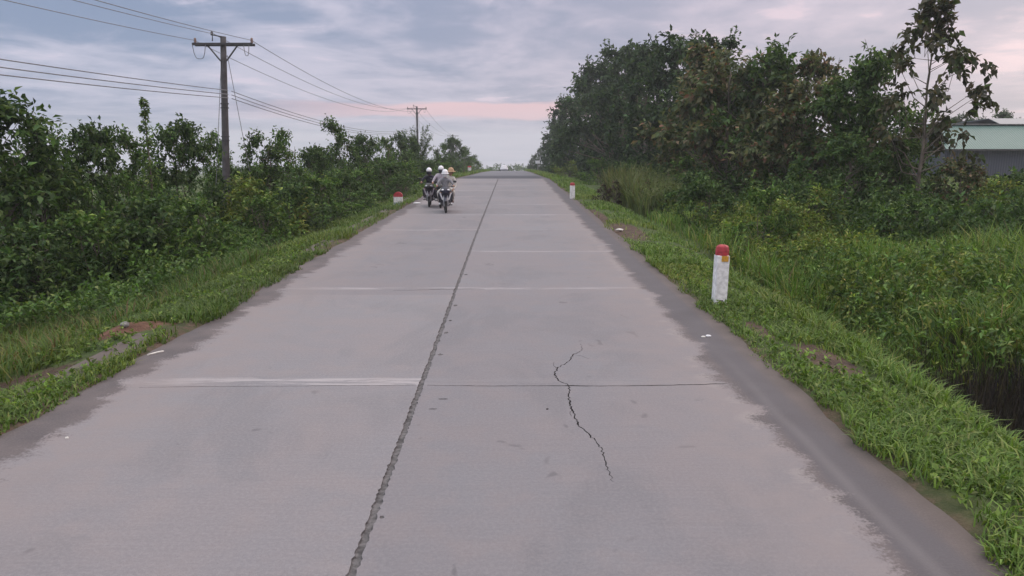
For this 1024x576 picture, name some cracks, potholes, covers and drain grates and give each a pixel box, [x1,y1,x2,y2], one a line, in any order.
crack [140,180,727,576]
